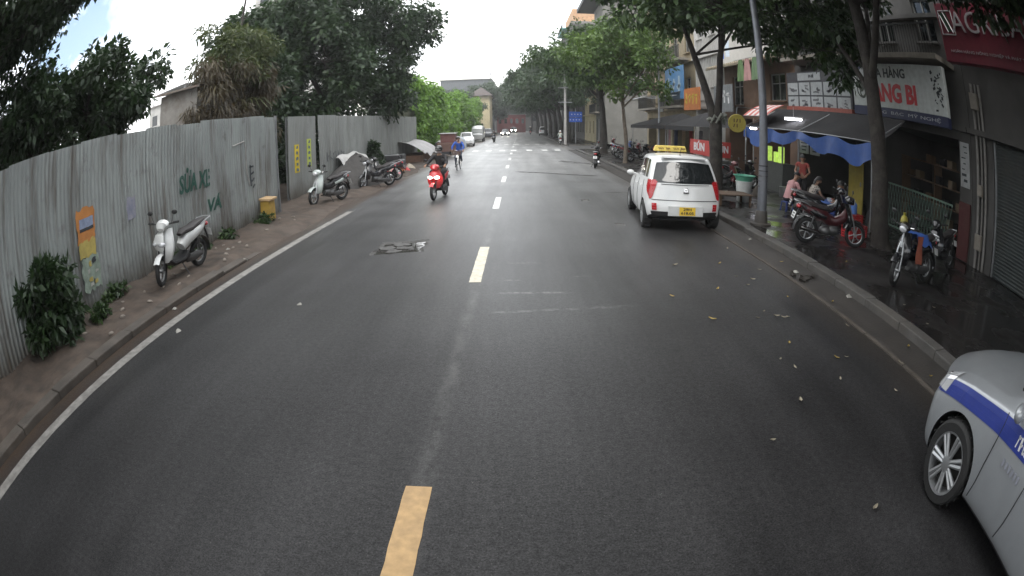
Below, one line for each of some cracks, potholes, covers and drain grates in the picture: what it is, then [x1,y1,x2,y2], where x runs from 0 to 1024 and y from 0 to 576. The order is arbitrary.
pothole [369,239,430,255]
